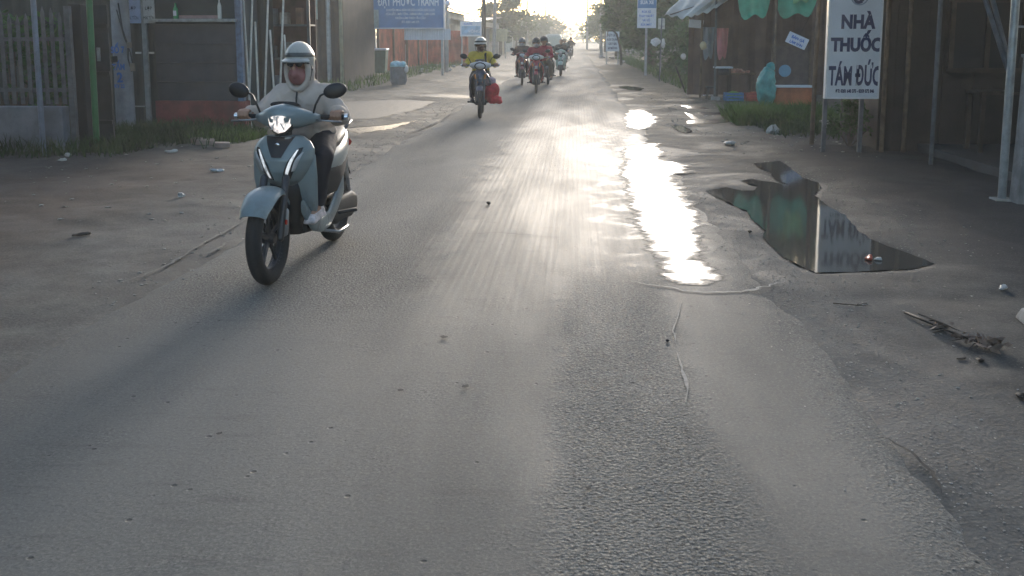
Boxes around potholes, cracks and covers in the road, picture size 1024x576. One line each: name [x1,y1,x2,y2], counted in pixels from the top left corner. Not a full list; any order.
pothole [703,160,935,277]
crack [633,281,779,401]
